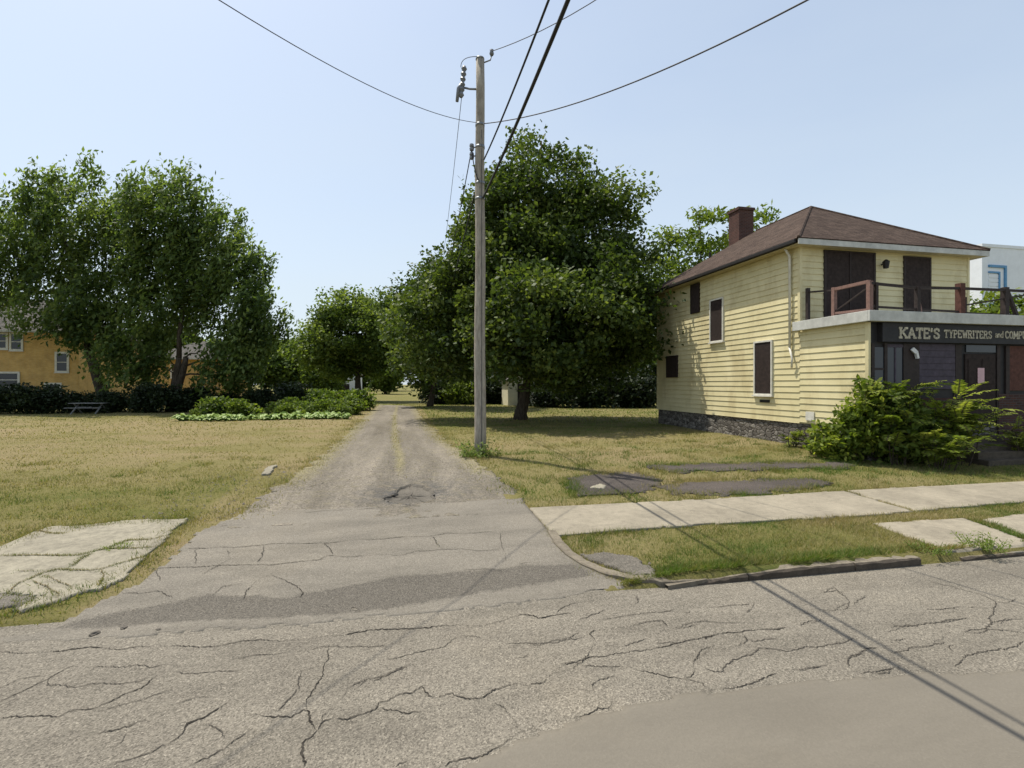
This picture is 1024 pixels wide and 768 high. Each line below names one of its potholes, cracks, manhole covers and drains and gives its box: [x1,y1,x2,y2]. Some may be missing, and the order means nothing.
crack [122,531,534,599]
pothole [380,483,437,505]
crack [0,582,1023,767]
